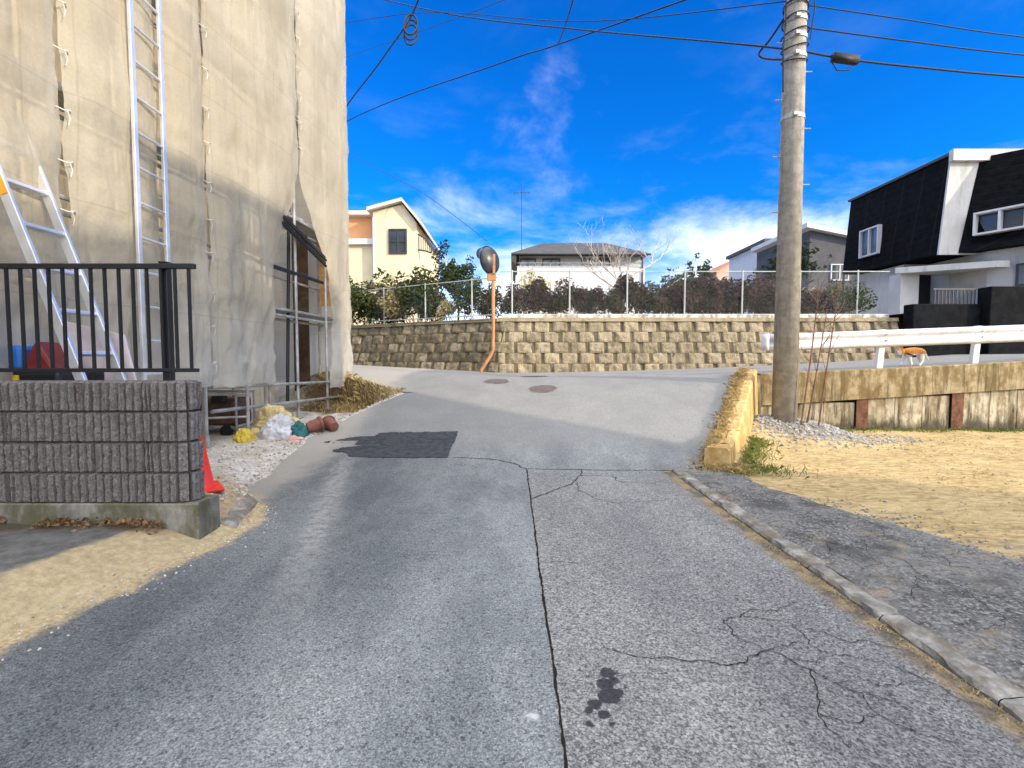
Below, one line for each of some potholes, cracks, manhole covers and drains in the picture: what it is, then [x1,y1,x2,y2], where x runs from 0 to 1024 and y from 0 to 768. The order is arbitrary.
manhole cover [528,385,558,393]
crack [534,469,669,503]
crack [603,604,968,768]
